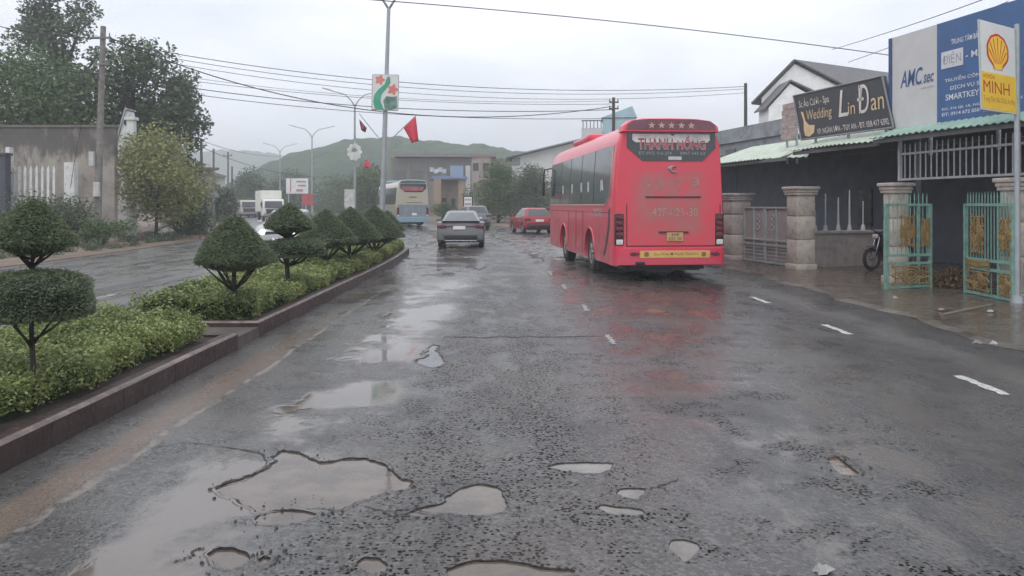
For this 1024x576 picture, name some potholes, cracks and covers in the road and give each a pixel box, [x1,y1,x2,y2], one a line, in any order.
pothole [412,344,453,368]
pothole [543,461,624,475]
crack [157,442,268,488]
pothole [563,503,649,517]
pothole [395,476,526,520]
crack [363,505,432,516]
pothole [208,448,420,520]
pothole [611,478,650,503]
pothole [335,549,403,576]
pothole [654,526,709,565]
pothole [430,544,581,576]
